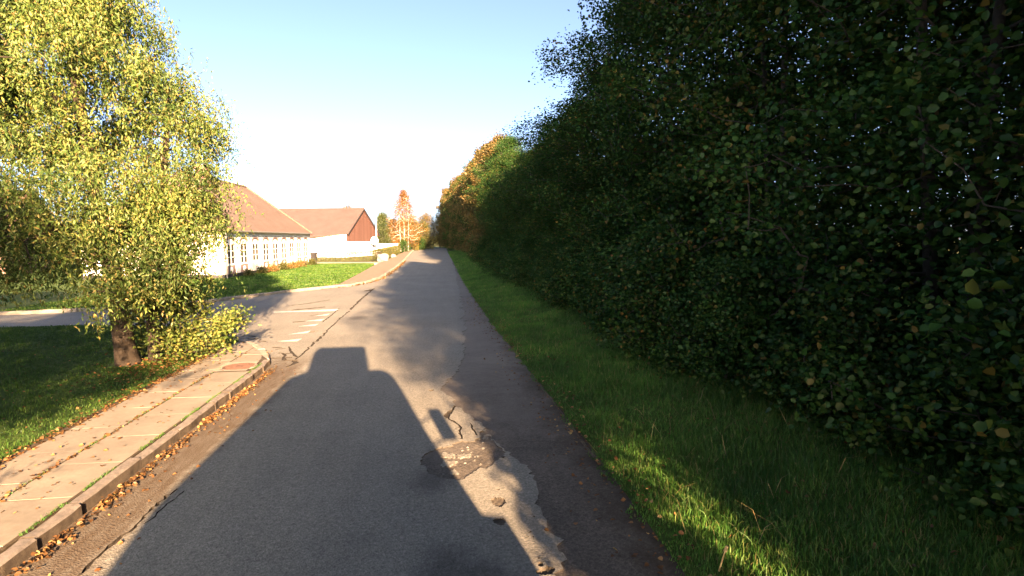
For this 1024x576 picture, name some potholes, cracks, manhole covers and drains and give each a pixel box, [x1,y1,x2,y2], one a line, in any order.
pothole [420,431,505,480]
crack [77,489,184,576]
crack [444,406,477,439]
pothole [491,497,506,507]
